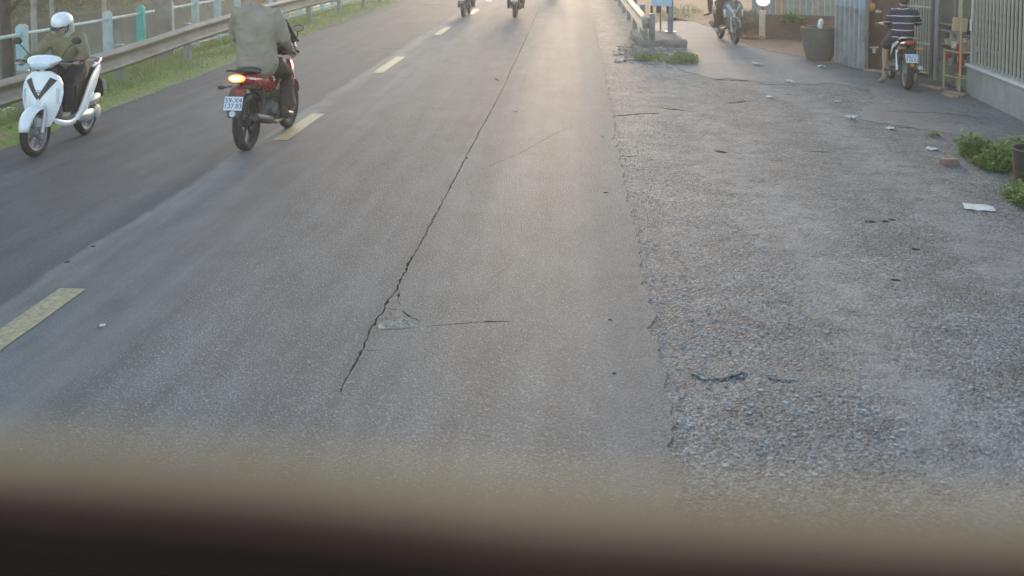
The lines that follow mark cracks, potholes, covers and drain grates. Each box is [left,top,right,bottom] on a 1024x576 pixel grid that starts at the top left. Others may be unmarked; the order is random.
crack [340,12,537,392]
